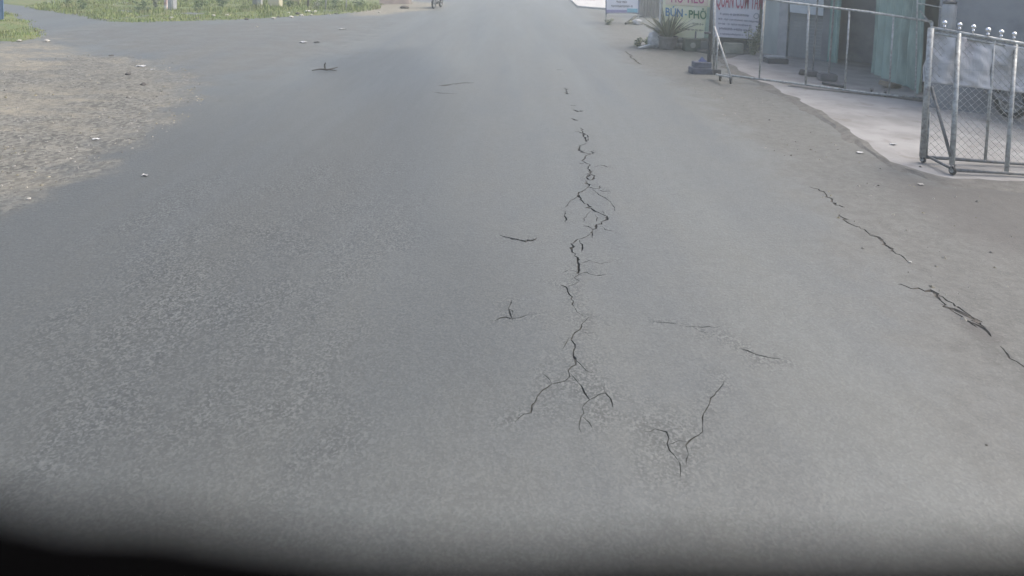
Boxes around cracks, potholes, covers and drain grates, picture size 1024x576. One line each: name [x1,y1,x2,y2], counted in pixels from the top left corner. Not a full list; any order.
crack [517,88,615,432]
crack [900,284,1024,367]
crack [647,380,724,476]
crack [811,187,908,262]
